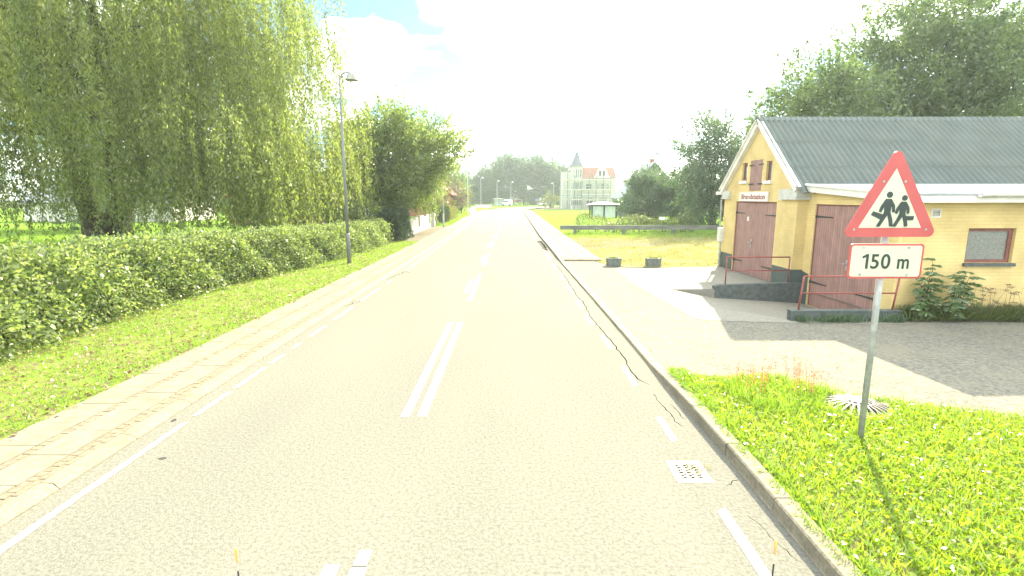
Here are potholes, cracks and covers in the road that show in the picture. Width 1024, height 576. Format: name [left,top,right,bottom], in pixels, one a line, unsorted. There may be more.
crack [553,262,683,425]
